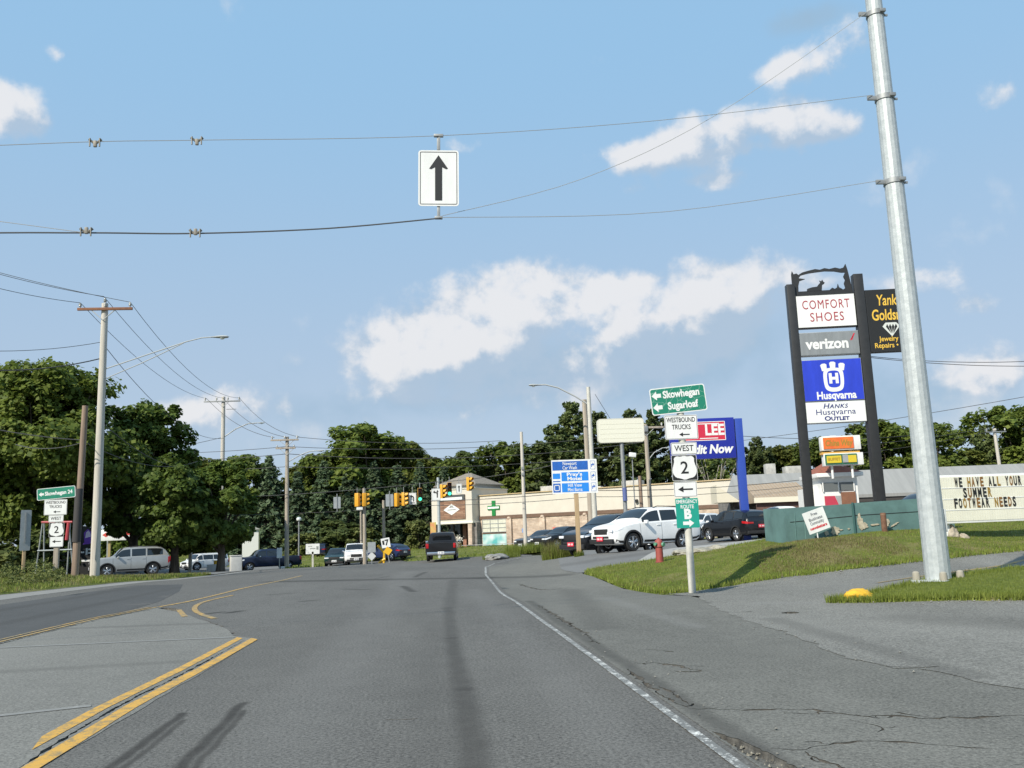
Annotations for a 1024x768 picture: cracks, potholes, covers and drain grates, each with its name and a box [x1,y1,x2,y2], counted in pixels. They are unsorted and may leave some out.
crack [643,651,701,672]
crack [742,709,1000,768]
